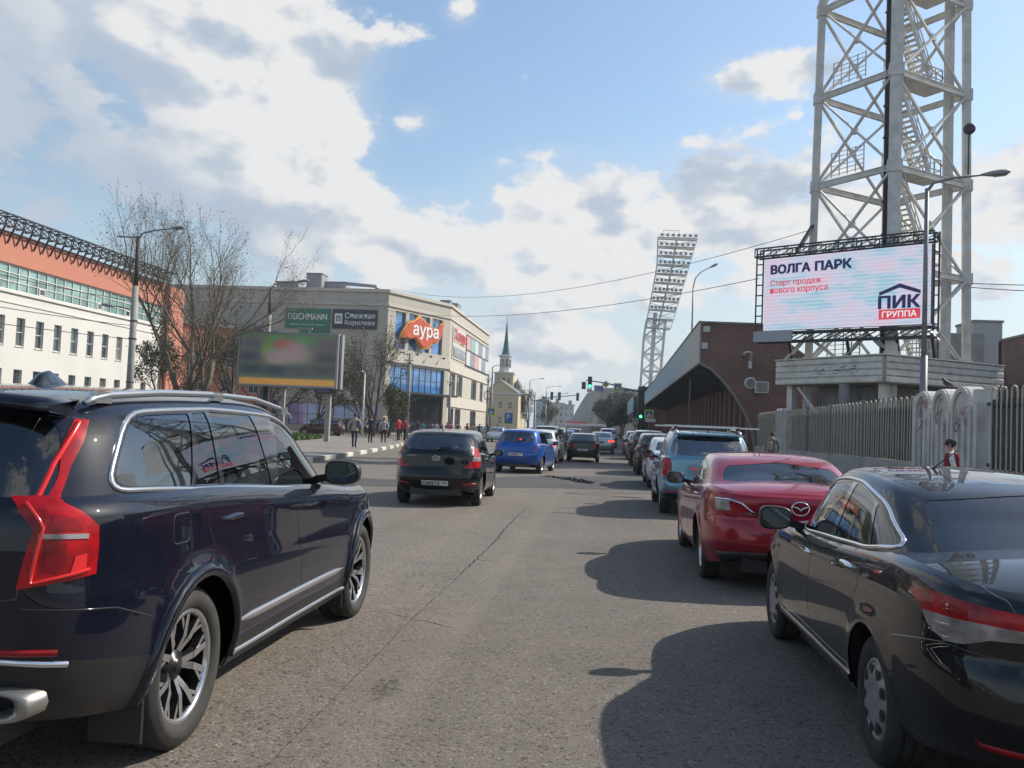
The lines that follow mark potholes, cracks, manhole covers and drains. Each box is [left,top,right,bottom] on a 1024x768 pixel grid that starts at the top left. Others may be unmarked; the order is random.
pothole [538,475,596,484]
crack [265,507,528,768]
